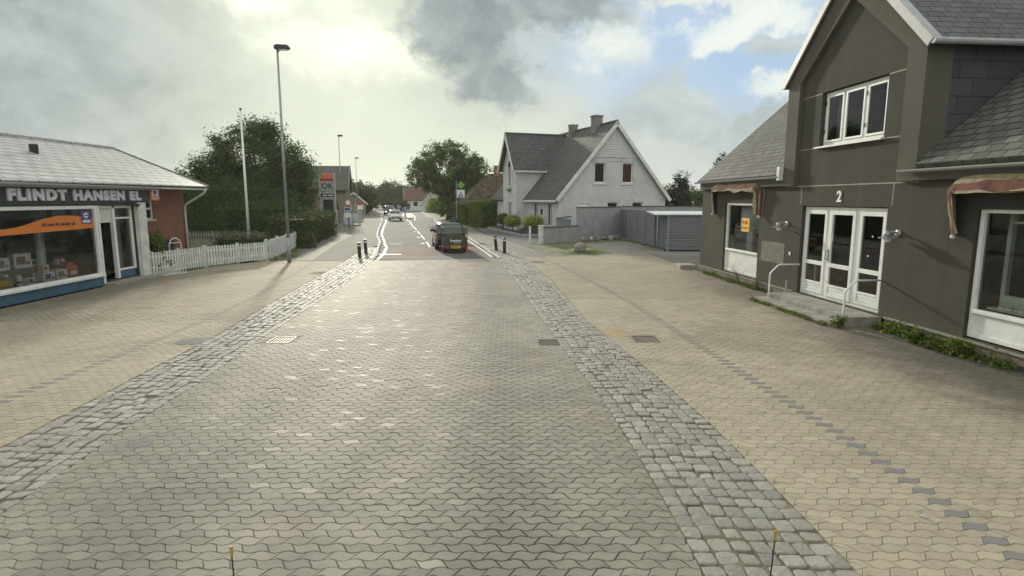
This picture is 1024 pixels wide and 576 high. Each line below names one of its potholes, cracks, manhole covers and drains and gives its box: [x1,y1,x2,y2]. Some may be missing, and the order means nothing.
drain grate [252,336,304,345]
drain grate [626,335,671,344]
manhole cover [165,337,222,347]
drain grate [527,338,571,347]
